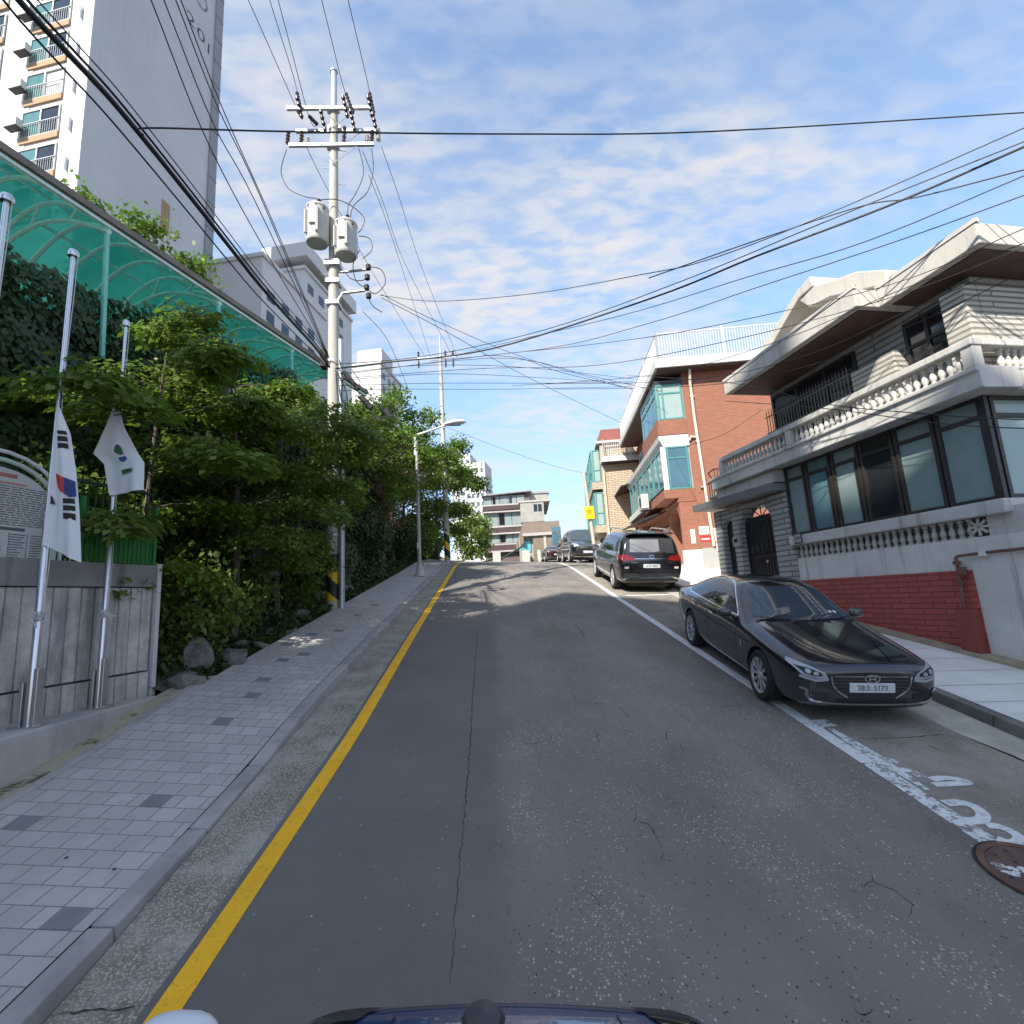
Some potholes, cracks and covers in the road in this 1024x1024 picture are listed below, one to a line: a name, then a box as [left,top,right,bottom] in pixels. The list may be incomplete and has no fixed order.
crack [860,734,962,751]
crack [51,1005,149,1016]
manhole cover [972,840,1024,895]
